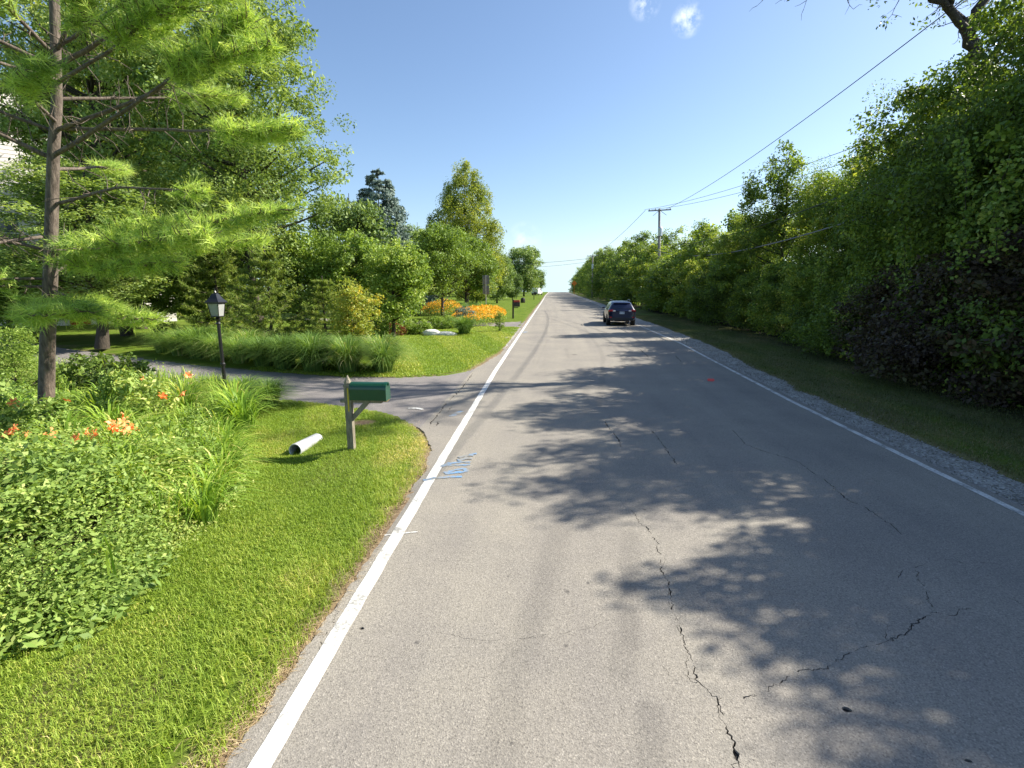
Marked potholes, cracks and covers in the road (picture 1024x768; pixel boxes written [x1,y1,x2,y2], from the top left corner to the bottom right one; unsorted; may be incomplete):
crack [720,565,969,699]
crack [732,430,902,535]
crack [632,511,741,768]
